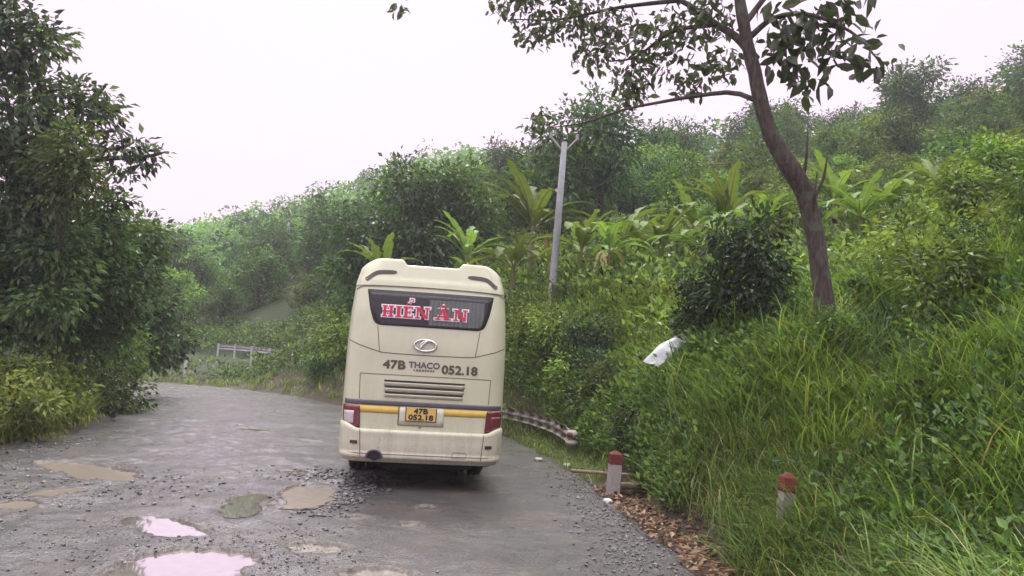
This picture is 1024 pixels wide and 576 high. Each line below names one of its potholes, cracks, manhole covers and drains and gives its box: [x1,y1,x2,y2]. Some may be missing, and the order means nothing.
pothole [406,503,444,511]
pothole [323,563,424,576]
pothole [109,514,218,541]
pothole [15,486,95,500]
pothole [271,539,362,557]
pothole [0,497,50,512]
pothole [82,543,275,576]
pothole [211,491,287,520]
pothole [260,483,344,513]
pothole [29,459,150,484]
